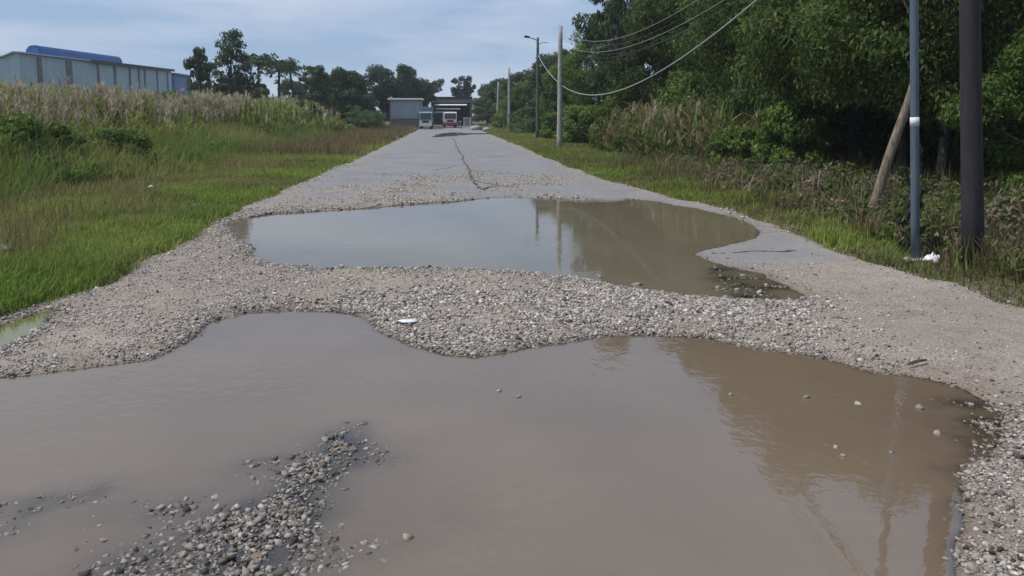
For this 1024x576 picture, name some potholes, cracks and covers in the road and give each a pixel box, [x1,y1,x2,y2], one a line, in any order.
pothole [0,303,1024,576]
crack [437,137,514,190]
pothole [214,195,828,302]
